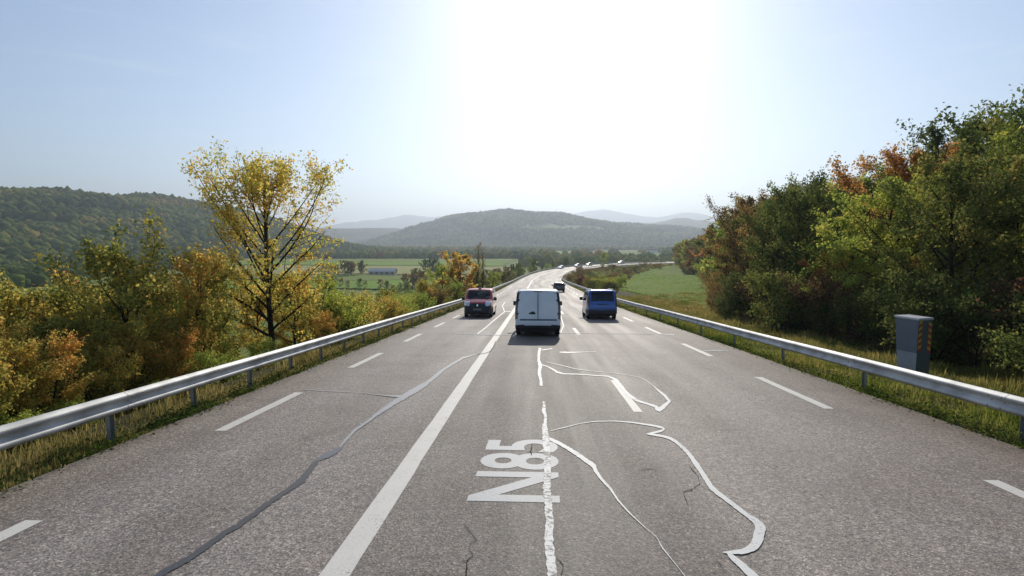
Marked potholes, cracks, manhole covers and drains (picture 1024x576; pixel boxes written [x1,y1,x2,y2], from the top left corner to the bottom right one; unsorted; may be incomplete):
crack [153,333,617,576]
